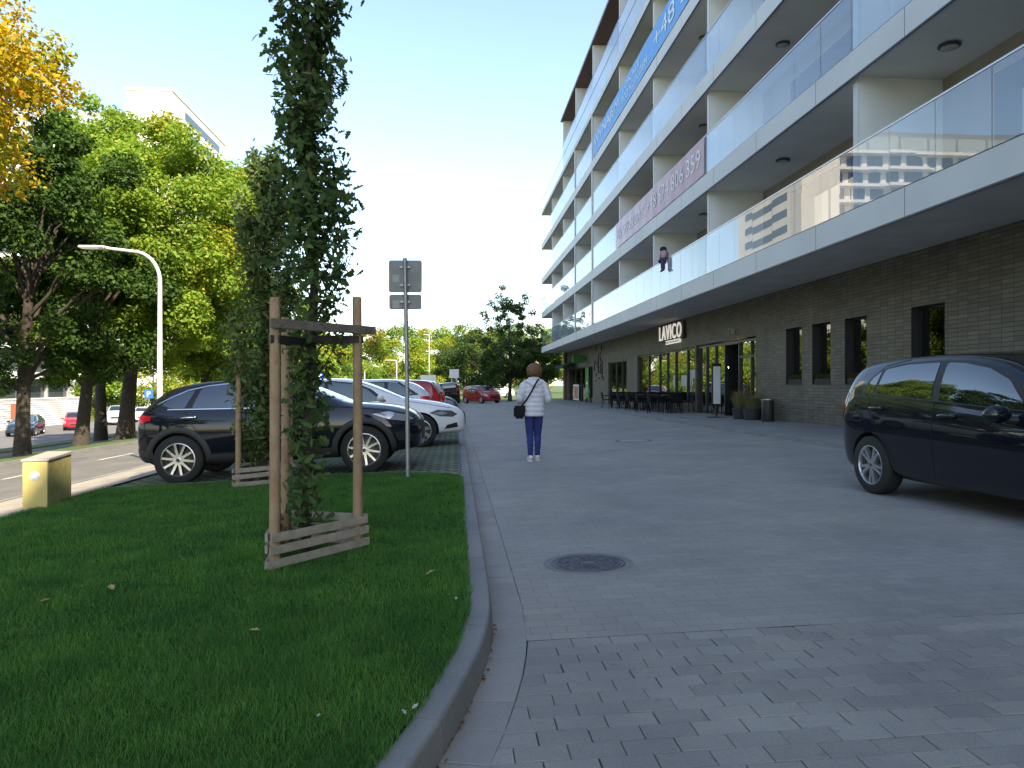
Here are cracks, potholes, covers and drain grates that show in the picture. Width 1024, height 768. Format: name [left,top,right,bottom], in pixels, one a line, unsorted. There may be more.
manhole cover [543,553,634,575]
